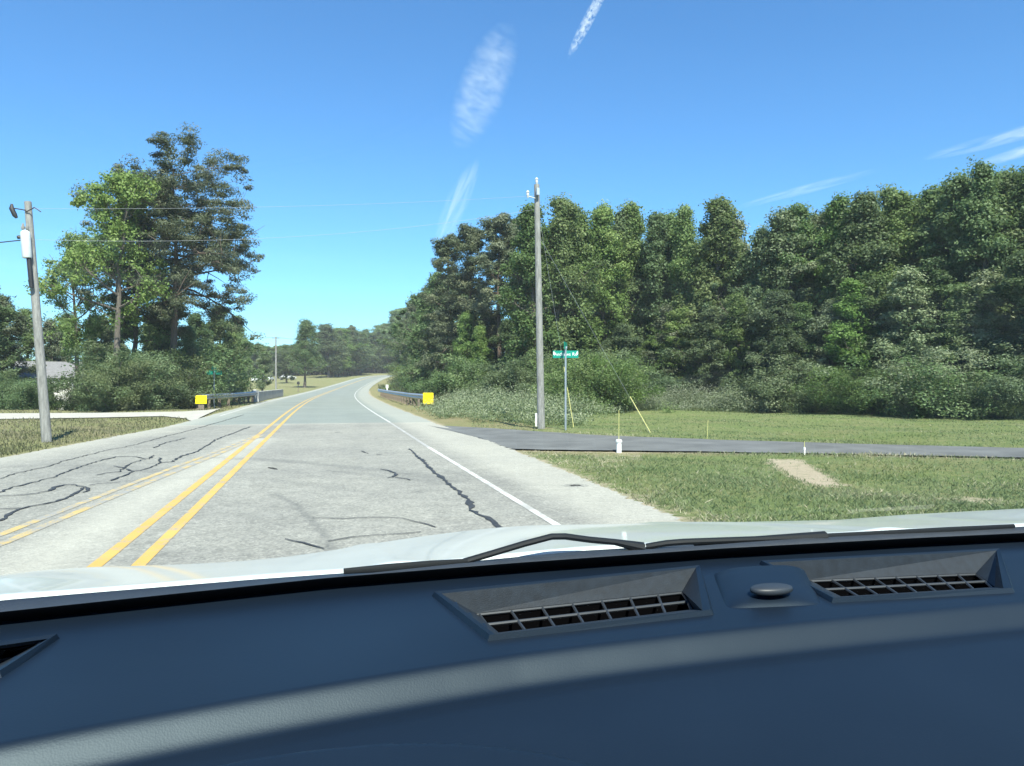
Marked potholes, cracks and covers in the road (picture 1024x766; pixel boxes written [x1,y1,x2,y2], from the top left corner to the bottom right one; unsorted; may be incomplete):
crack [0,415,249,521]
crack [285,517,436,549]
